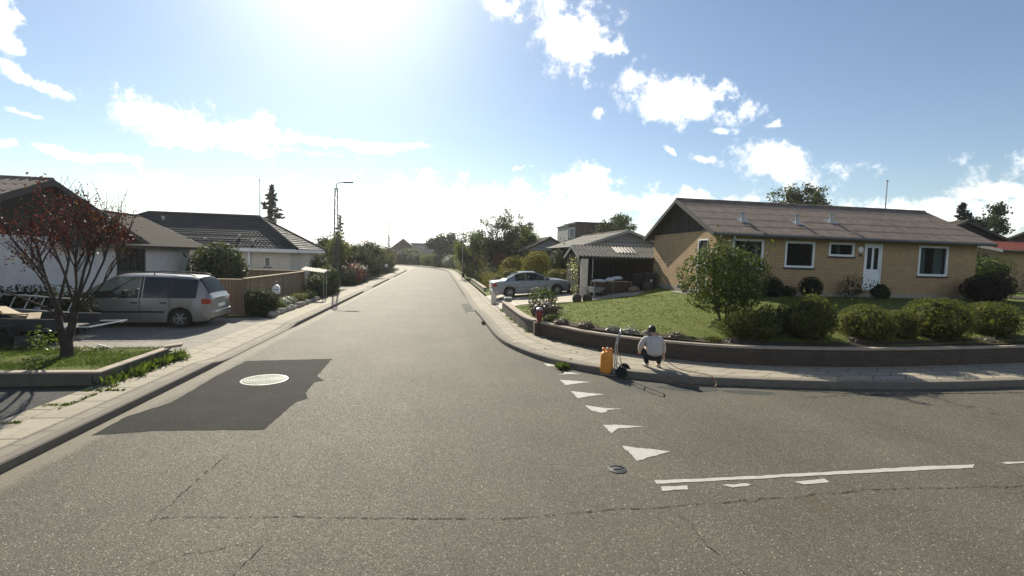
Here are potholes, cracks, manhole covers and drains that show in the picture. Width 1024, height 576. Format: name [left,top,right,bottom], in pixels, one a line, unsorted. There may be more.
utility cover [608,465,627,474]
crack [128,485,1022,574]
manhole cover [240,374,289,386]
